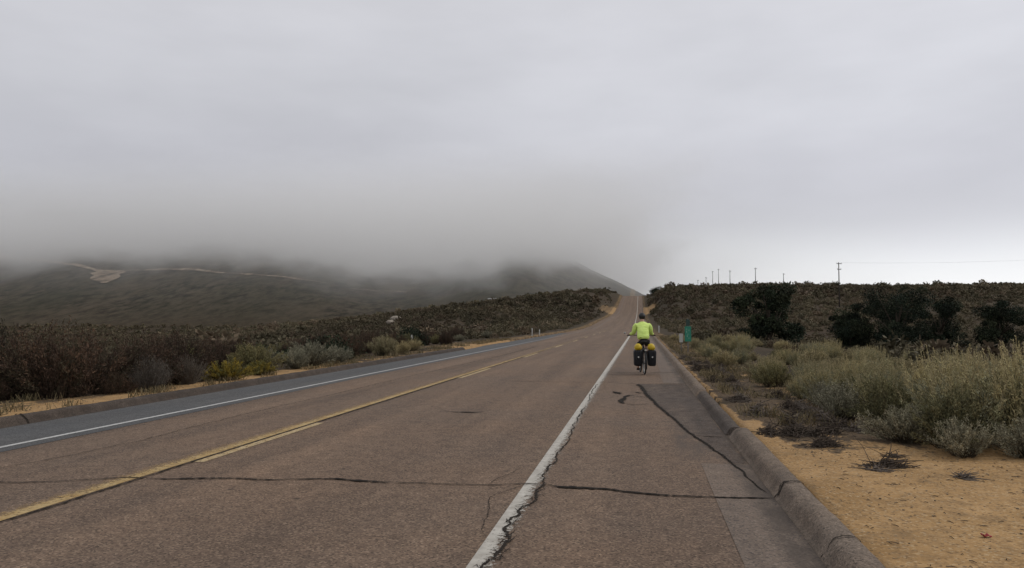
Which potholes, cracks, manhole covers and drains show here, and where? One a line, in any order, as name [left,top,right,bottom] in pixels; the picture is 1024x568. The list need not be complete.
crack [0,347,766,568]
